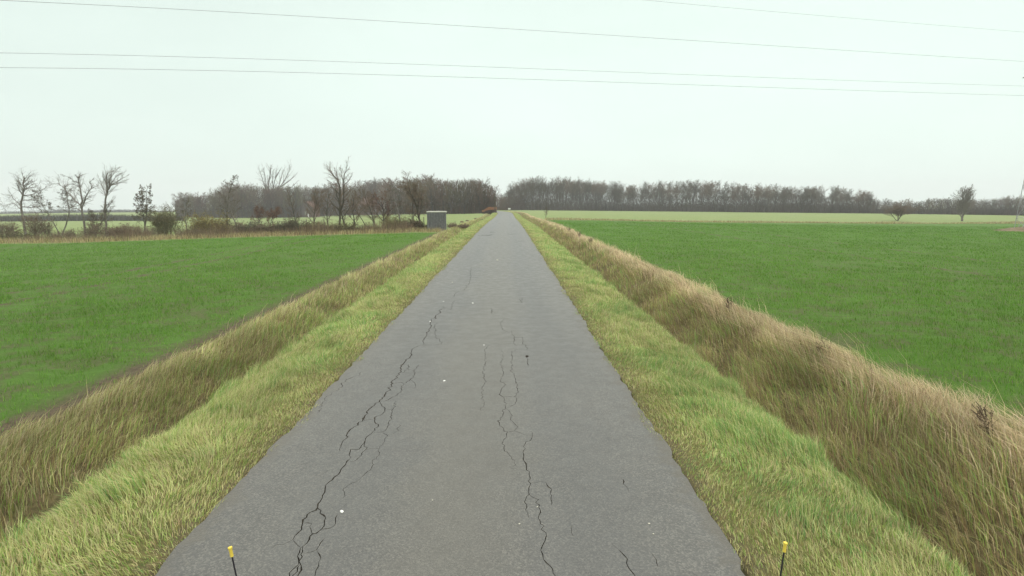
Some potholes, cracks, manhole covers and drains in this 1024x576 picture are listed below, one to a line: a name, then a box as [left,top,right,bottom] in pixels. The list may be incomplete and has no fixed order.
crack [272,307,452,576]
crack [480,322,555,575]
